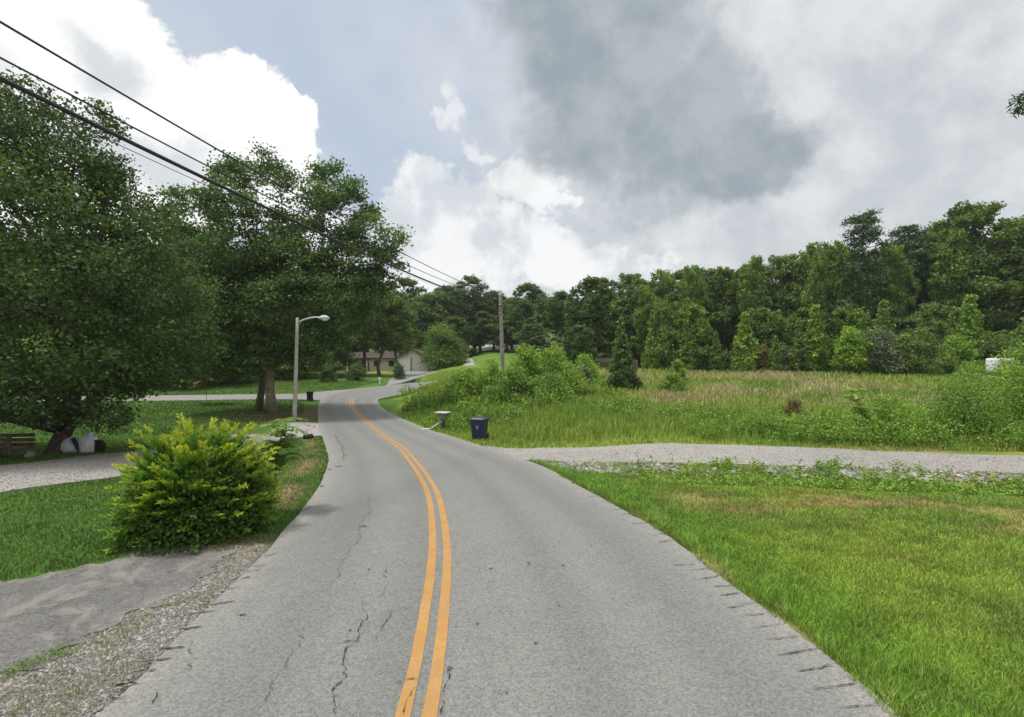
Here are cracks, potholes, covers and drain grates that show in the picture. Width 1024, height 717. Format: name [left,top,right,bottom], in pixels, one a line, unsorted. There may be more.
crack [261,623,308,703]
crack [330,567,407,714]
